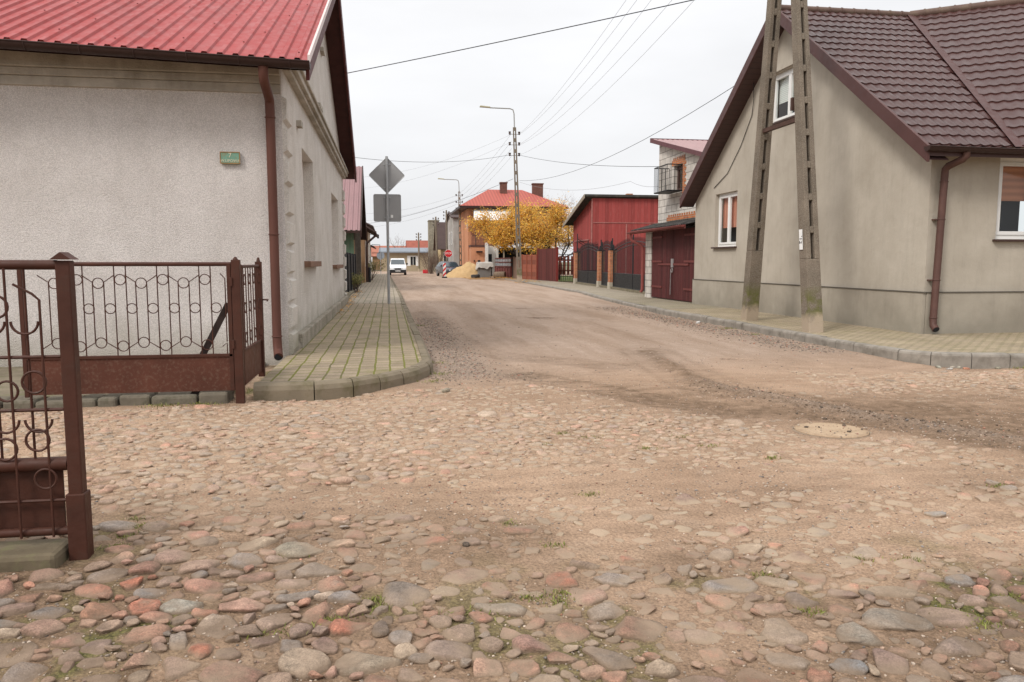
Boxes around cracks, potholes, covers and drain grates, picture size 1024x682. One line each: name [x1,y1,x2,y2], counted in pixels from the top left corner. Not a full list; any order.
manhole cover [791,422,872,439]
